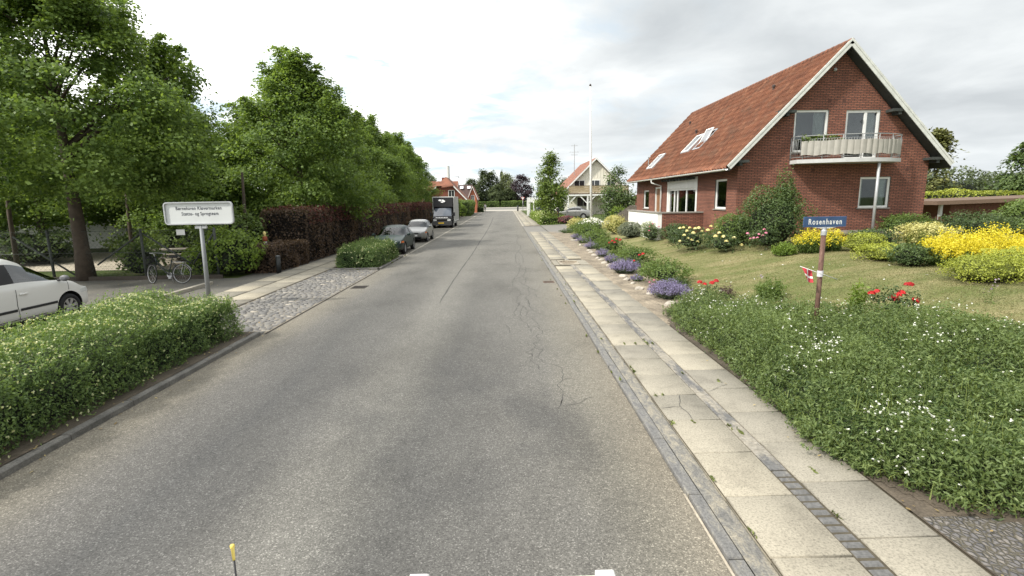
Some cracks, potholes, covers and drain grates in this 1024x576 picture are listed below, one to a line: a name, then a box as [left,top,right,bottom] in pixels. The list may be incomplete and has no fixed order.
crack [503,234,590,409]
